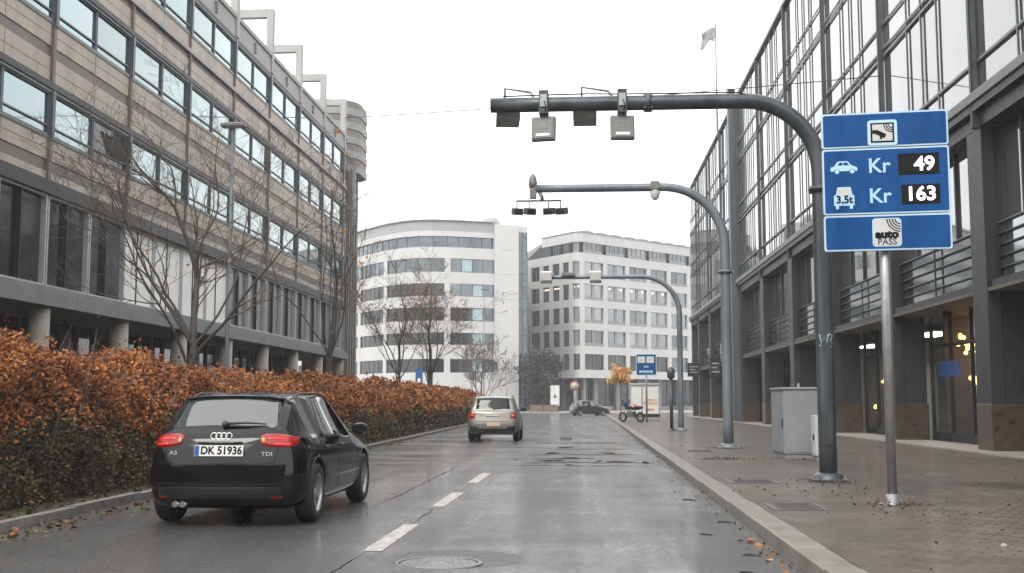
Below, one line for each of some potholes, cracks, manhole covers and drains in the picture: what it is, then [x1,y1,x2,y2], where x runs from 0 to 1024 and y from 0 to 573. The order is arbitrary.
manhole cover [381,550,523,569]
